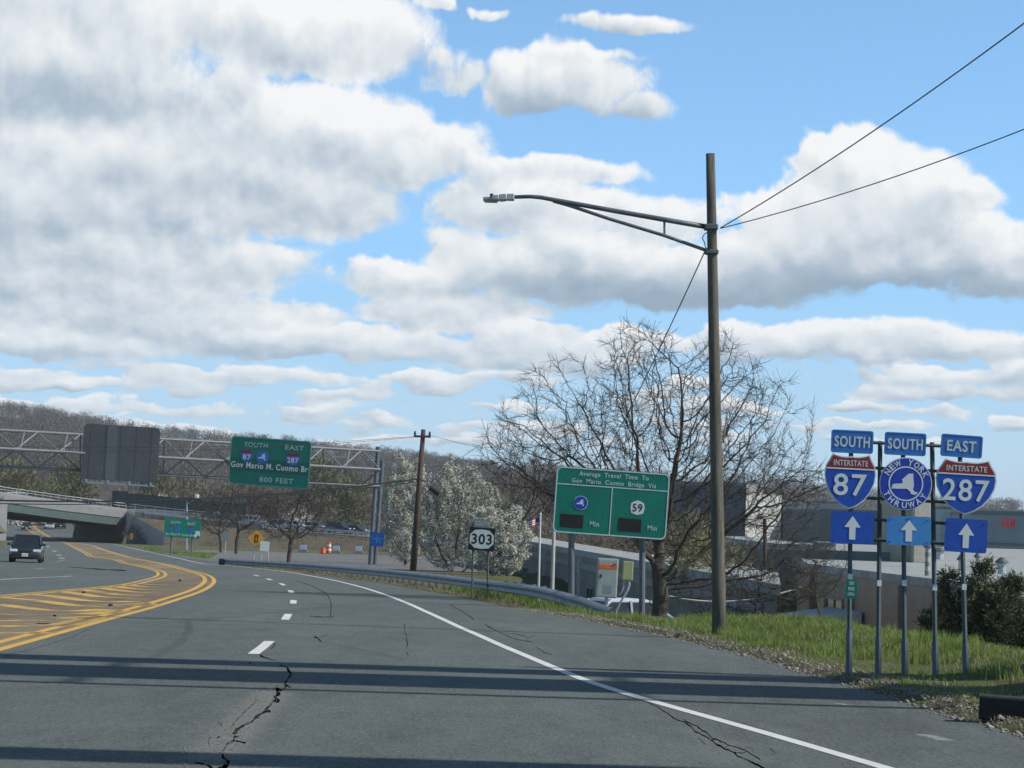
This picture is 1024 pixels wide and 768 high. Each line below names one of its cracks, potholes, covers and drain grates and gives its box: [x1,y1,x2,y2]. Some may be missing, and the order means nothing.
crack [644,701,775,768]
crack [294,580,334,641]
crack [451,605,551,655]
crack [195,643,292,768]
